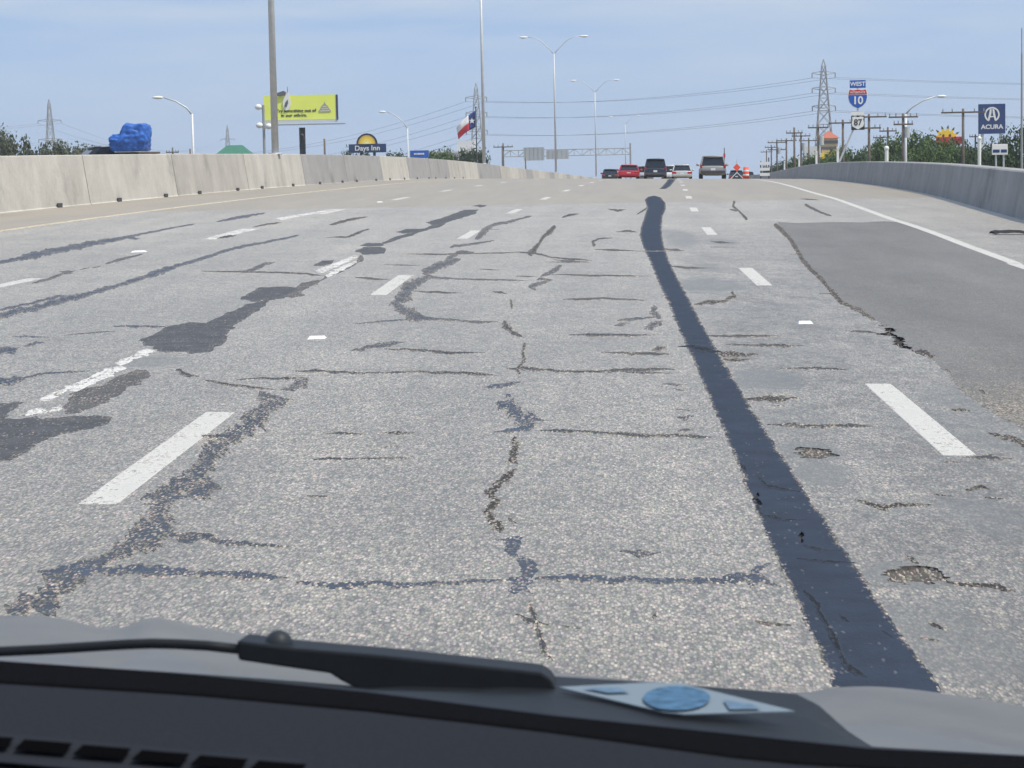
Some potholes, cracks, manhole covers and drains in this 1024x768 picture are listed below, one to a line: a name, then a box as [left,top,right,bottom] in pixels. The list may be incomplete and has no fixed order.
crack [950,390,986,412]
crack [943,432,1024,463]
pothole [881,565,951,585]
crack [515,601,580,661]
crack [4,199,952,617]
crack [855,484,1005,511]
crack [905,555,1016,641]
pothole [793,447,840,459]
